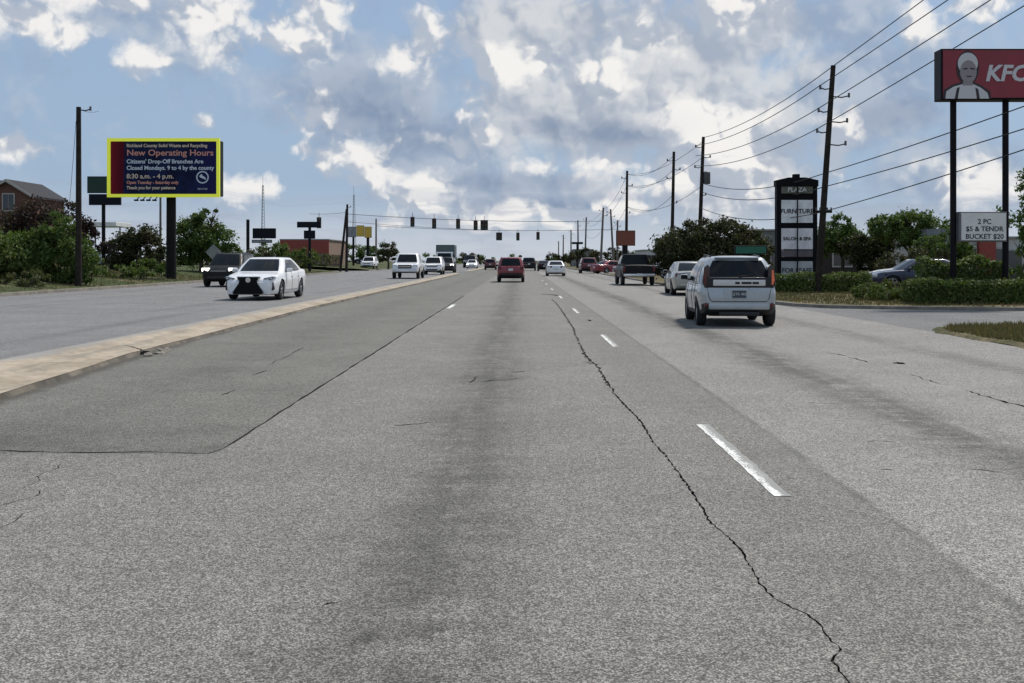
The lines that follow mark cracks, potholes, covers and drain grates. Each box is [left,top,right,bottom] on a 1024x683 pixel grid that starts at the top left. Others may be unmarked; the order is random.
crack [543,294,855,683]
crack [831,353,1024,407]
crack [2,464,60,527]
